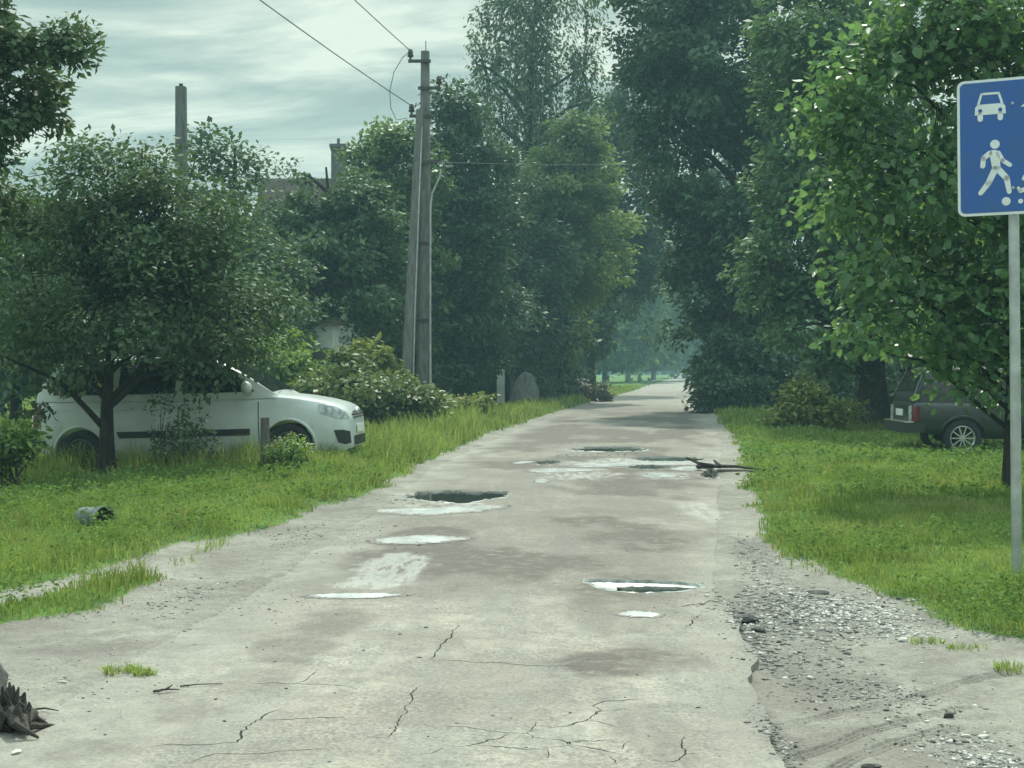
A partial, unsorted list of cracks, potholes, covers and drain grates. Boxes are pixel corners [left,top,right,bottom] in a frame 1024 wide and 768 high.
crack [667,738,700,762]
crack [429,626,567,667]
crack [369,688,417,738]
pothole [404,490,512,504]
crack [257,673,341,686]
crack [419,699,636,764]
crack [151,709,344,761]
pothole [582,579,704,593]
